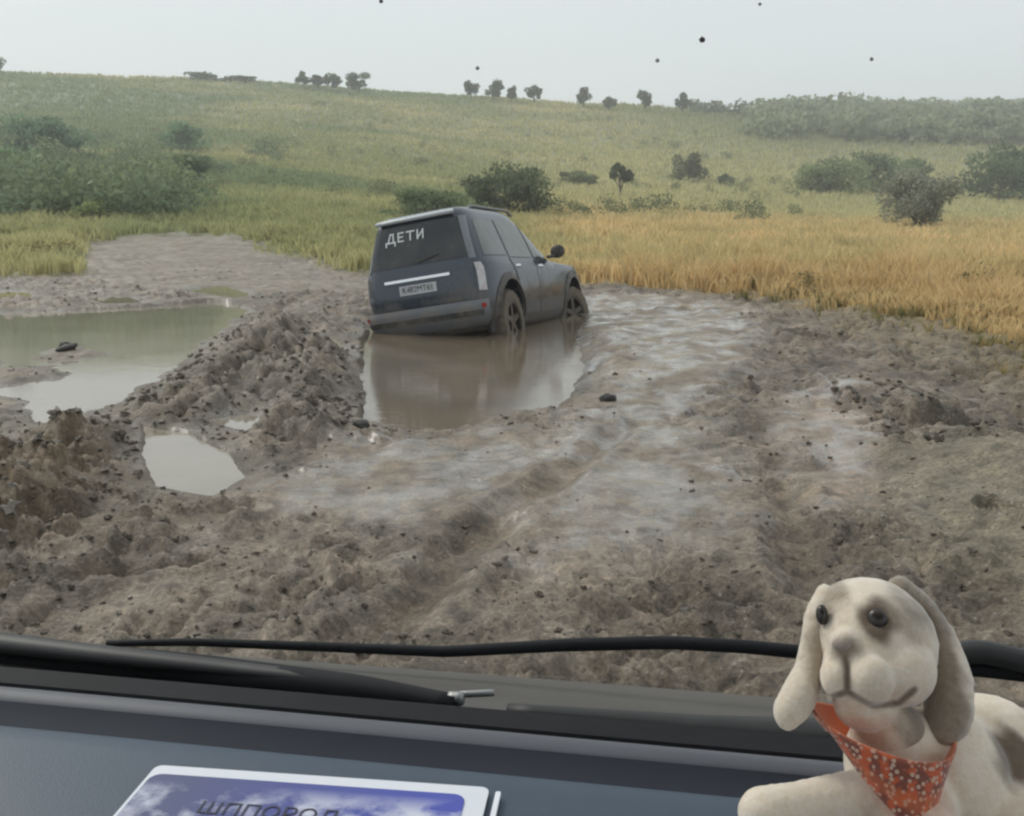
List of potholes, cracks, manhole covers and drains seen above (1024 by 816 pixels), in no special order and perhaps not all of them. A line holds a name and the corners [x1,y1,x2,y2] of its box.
pothole [117,413,262,496]
pothole [340,312,597,430]
pothole [0,297,251,426]
